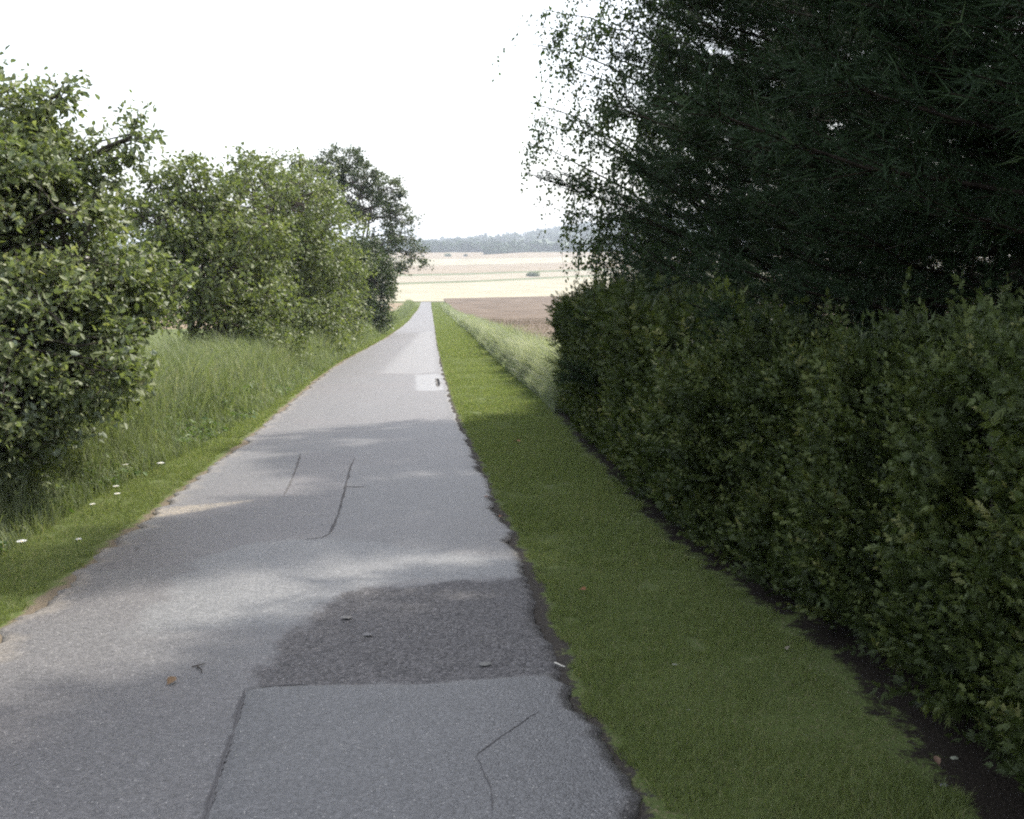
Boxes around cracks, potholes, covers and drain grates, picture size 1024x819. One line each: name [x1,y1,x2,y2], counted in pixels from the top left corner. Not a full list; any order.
crack [283,453,301,496]
crack [477,712,538,810]
